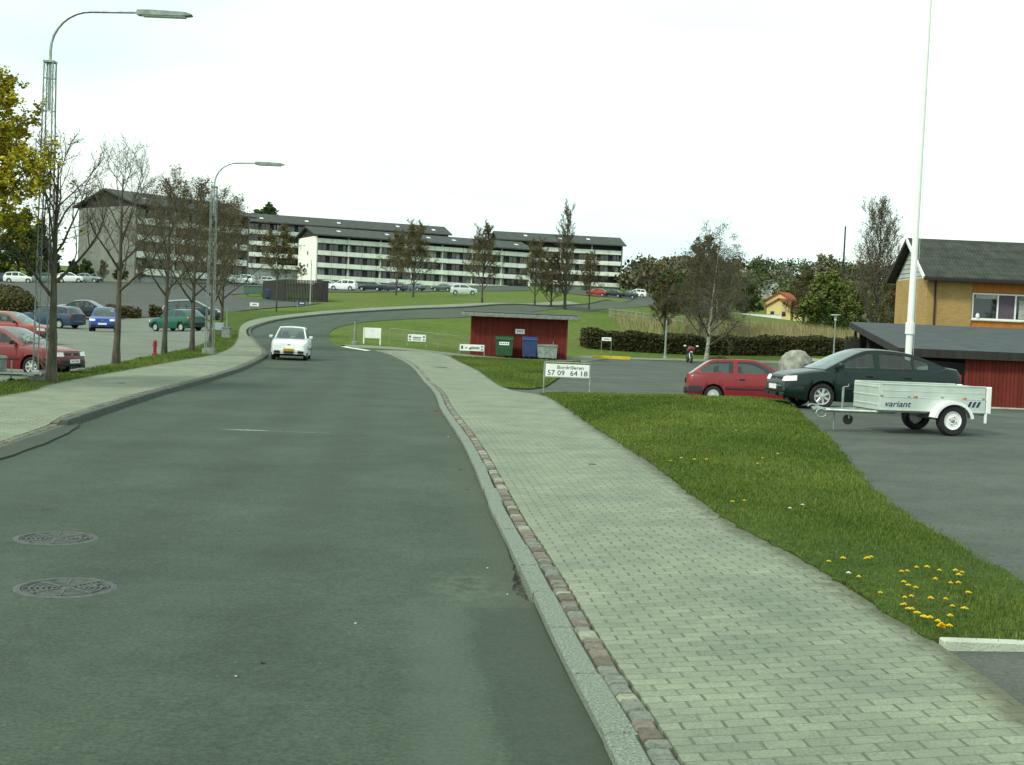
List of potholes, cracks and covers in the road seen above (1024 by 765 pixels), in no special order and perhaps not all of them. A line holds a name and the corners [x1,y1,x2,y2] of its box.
manhole cover [12,531,99,546]
pothole [509,554,529,601]
manhole cover [12,577,118,599]
